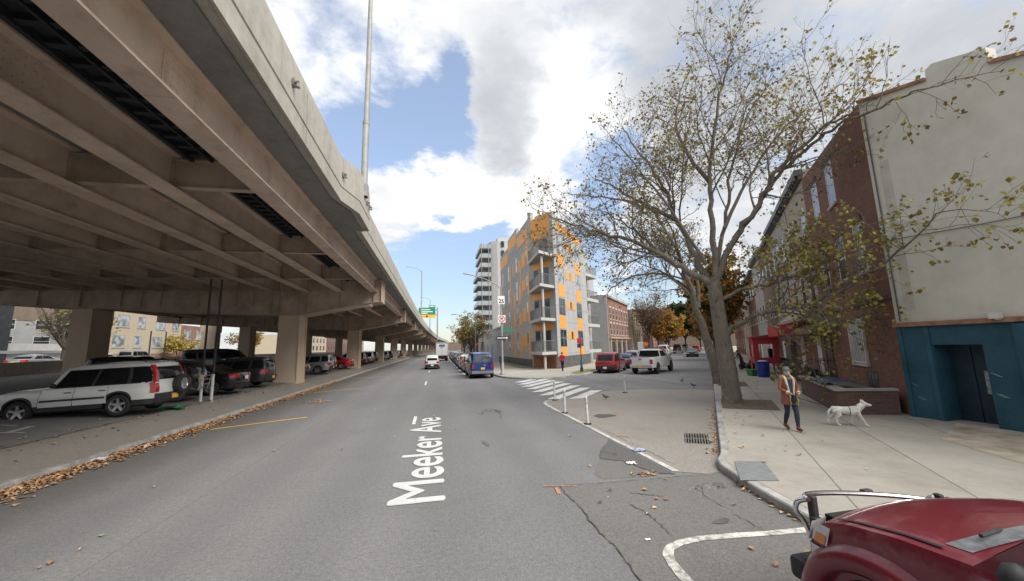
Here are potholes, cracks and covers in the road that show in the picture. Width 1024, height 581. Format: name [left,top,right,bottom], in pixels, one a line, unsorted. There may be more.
drain grate [684,433,710,445]
crack [559,446,765,581]
